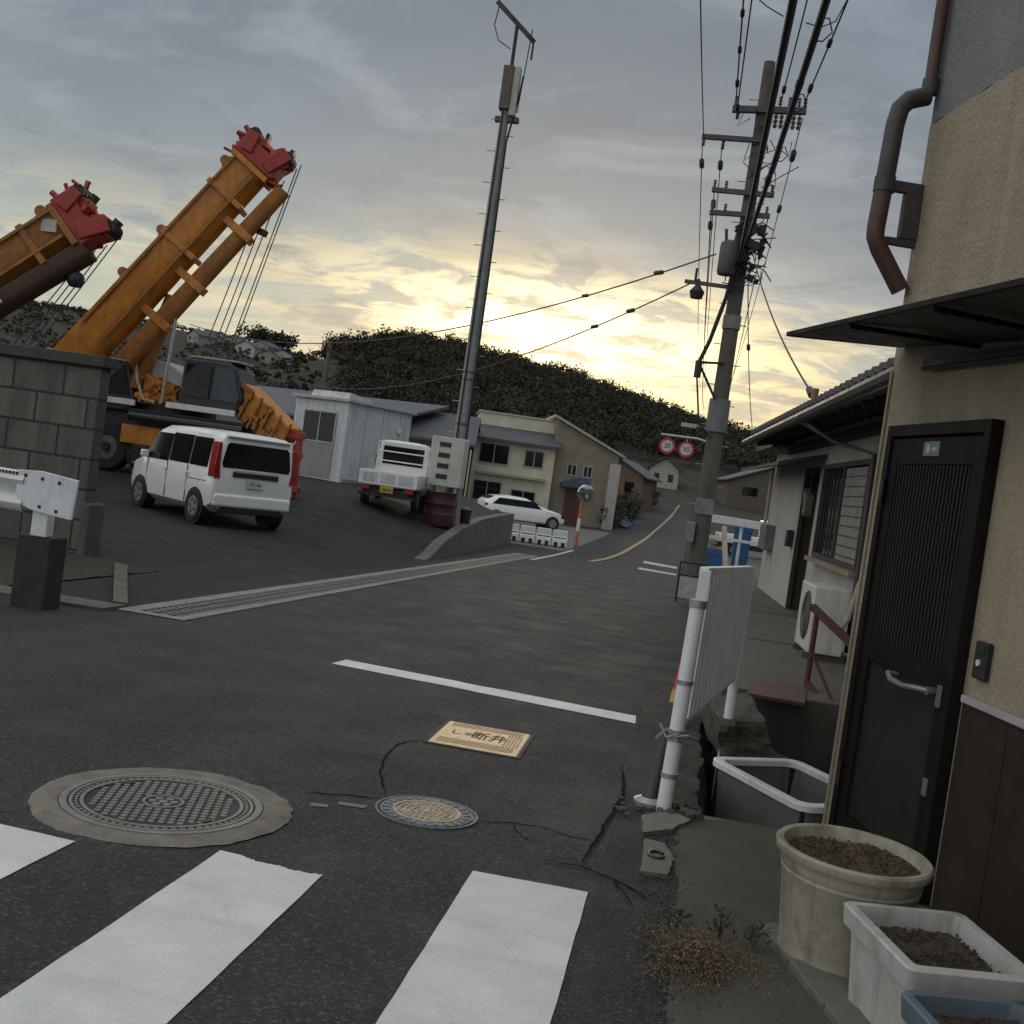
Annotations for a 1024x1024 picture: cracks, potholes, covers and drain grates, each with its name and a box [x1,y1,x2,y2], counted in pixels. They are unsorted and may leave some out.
manhole cover [423,720,535,760]
manhole cover [28,767,293,848]
manhole cover [375,795,478,830]
crack [483,821,599,841]
crack [547,860,648,906]
crack [311,738,426,799]
